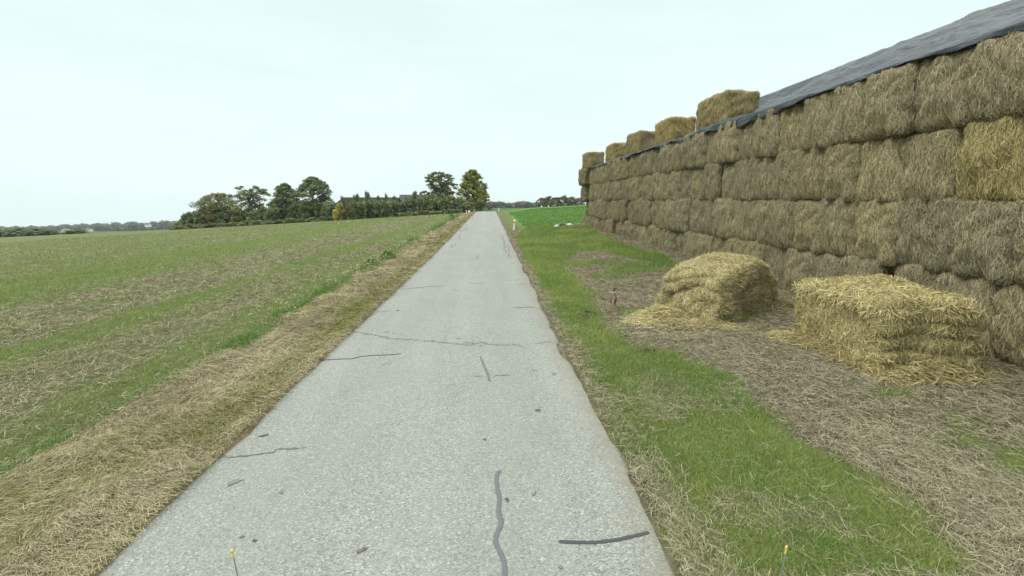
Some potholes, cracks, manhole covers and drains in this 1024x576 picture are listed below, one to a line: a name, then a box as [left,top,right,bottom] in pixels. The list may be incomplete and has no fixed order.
crack [216,447,304,458]
crack [355,331,520,354]
